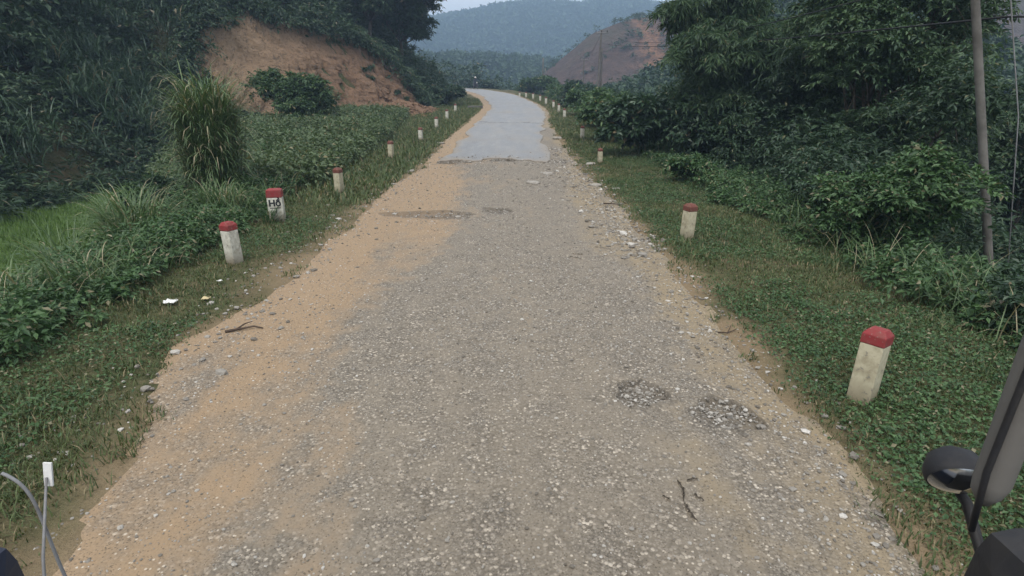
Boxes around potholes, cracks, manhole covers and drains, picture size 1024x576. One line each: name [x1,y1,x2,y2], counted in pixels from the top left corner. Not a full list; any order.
pothole [678,391,780,437]
pothole [607,375,680,417]
